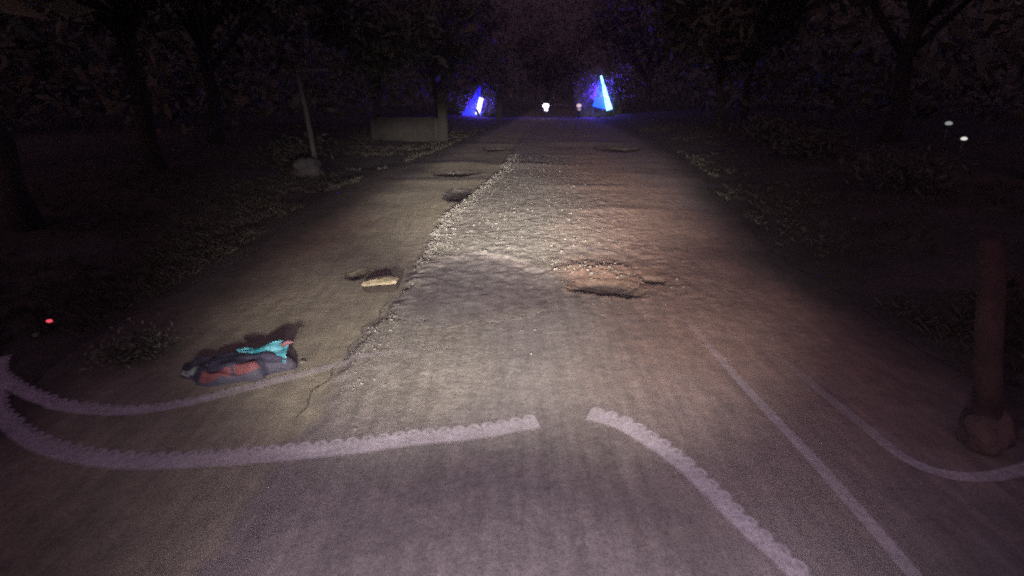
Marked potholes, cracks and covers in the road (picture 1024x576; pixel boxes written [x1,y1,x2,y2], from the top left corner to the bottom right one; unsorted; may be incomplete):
pothole [345,268,370,281]
pothole [441,188,472,203]
pothole [563,279,651,299]
crack [293,300,391,422]
pothole [638,275,670,286]
